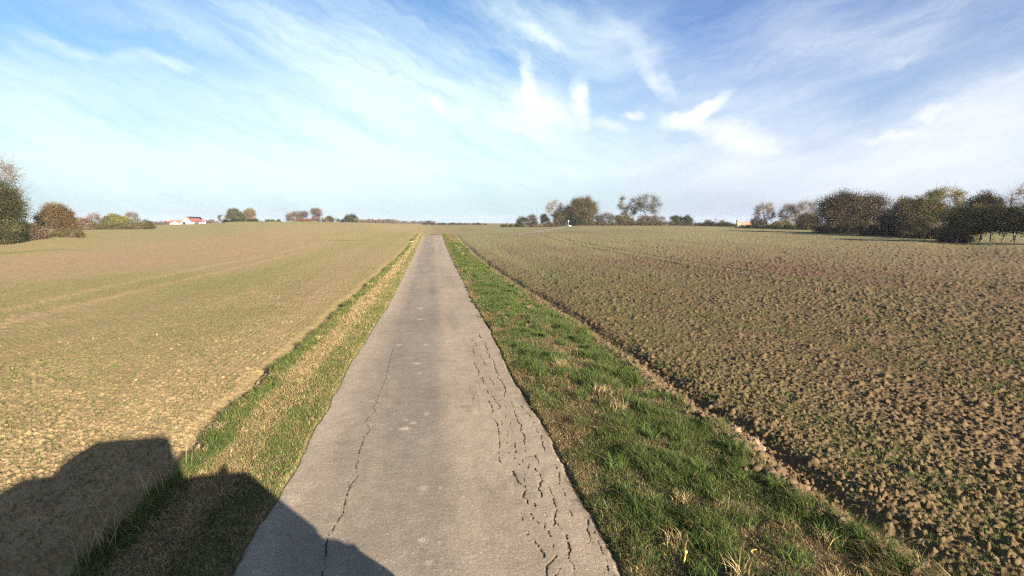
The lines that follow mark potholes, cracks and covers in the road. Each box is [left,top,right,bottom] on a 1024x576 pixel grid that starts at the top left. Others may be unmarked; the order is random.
crack [321,353,392,576]
